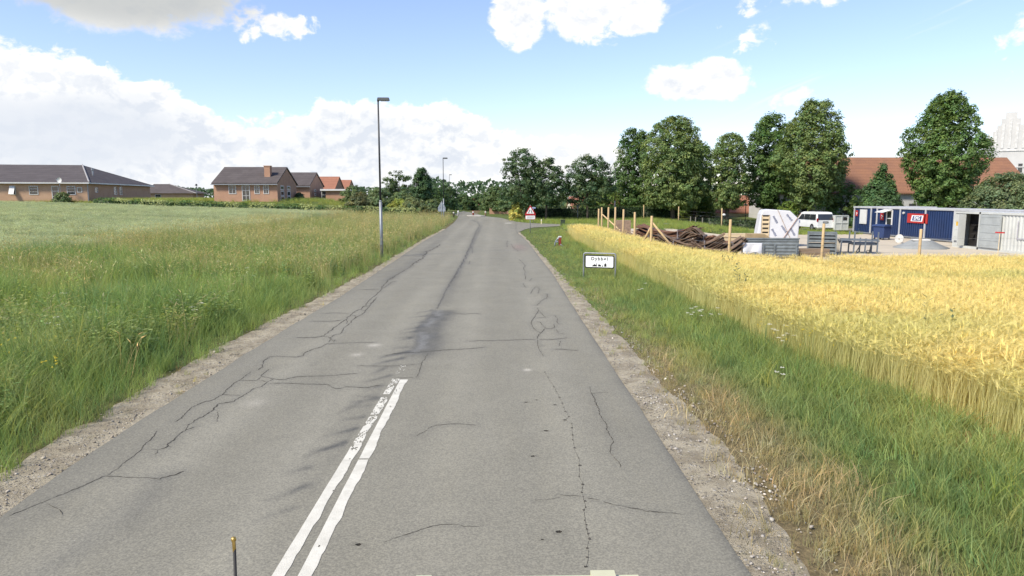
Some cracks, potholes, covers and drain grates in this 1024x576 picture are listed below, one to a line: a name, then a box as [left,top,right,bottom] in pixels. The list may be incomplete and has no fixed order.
crack [7,246,437,517]
crack [547,376,679,567]
crack [361,241,566,378]
